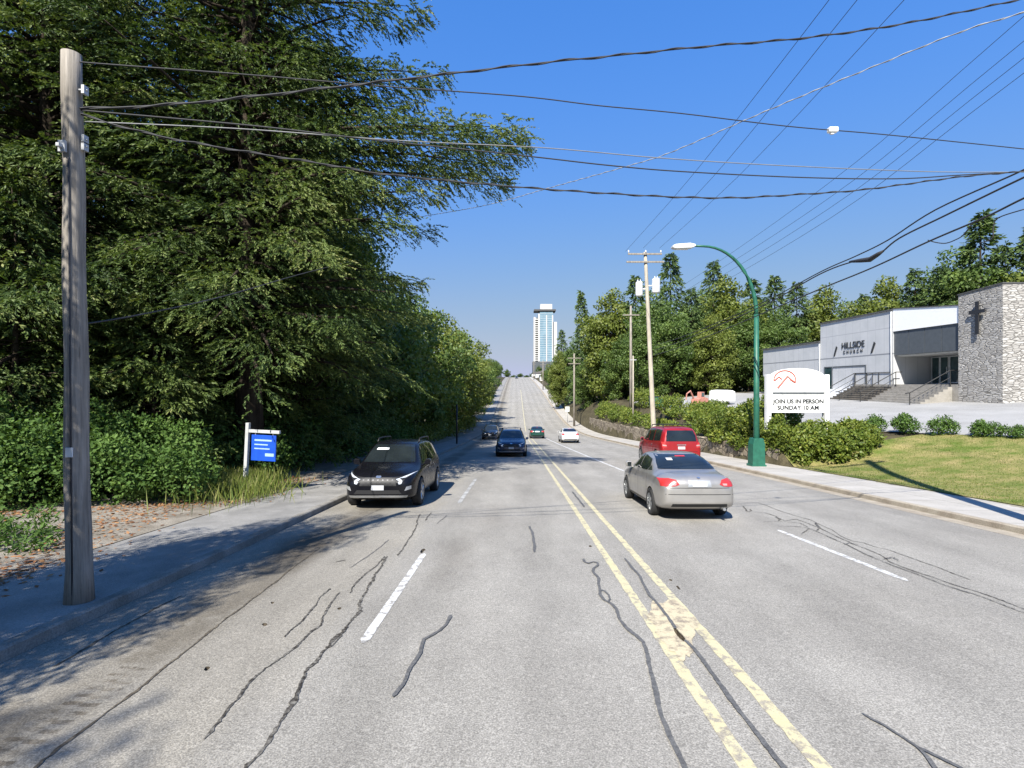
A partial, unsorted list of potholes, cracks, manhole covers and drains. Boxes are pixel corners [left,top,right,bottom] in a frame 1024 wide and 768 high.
crack [743,502,1024,612]
crack [203,513,447,768]
